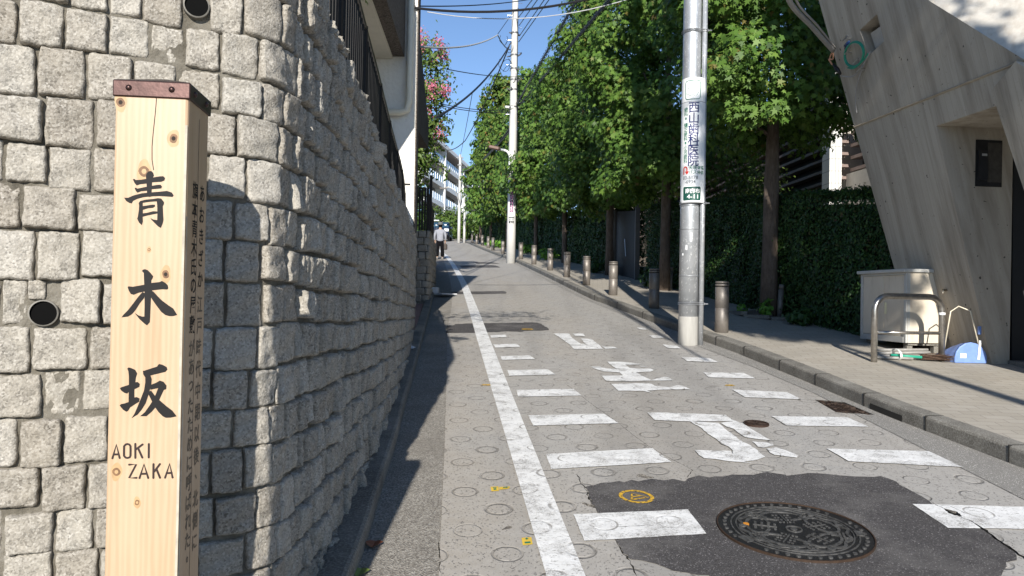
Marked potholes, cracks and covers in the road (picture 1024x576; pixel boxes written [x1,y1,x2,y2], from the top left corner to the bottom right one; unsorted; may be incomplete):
manhole cover [717,502,877,563]
crack [935,504,1024,558]
manhole cover [744,420,769,428]
drain grate [816,400,902,422]
